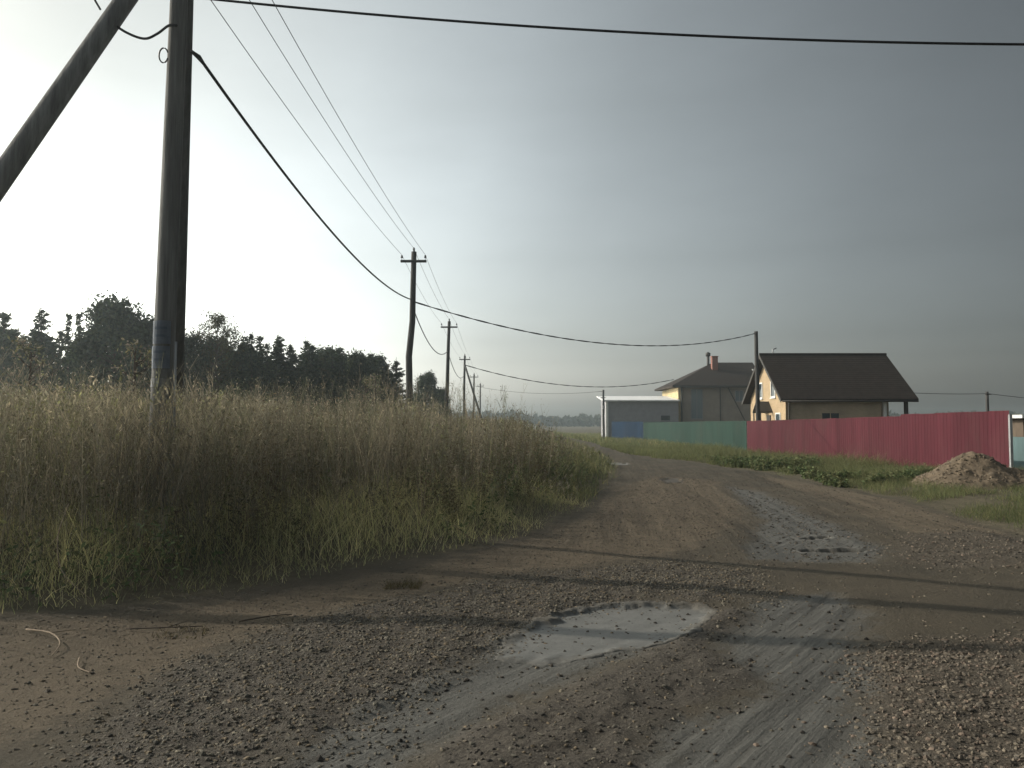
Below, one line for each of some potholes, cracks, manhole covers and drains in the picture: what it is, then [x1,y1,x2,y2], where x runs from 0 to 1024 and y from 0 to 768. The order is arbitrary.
pothole [495,600,719,667]
